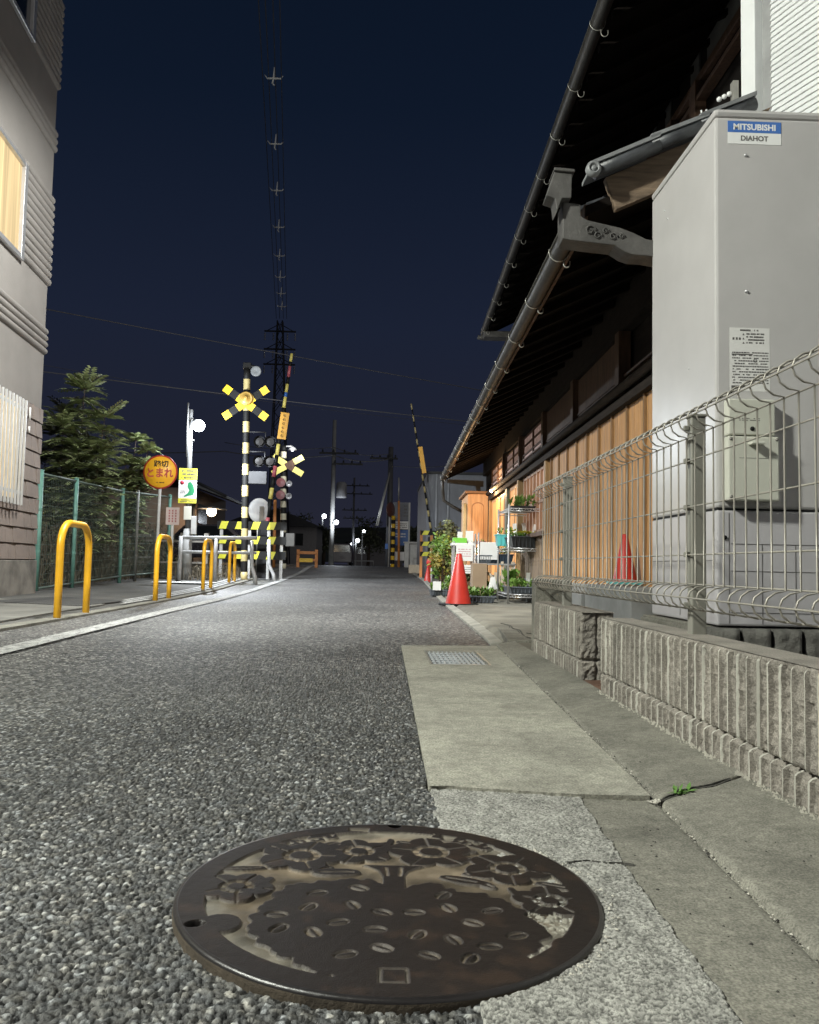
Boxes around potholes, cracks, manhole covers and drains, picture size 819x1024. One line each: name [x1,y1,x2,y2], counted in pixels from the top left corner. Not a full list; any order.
manhole cover [172,824,604,1016]
drain grate [424,651,491,665]
crack [660,778,731,809]
